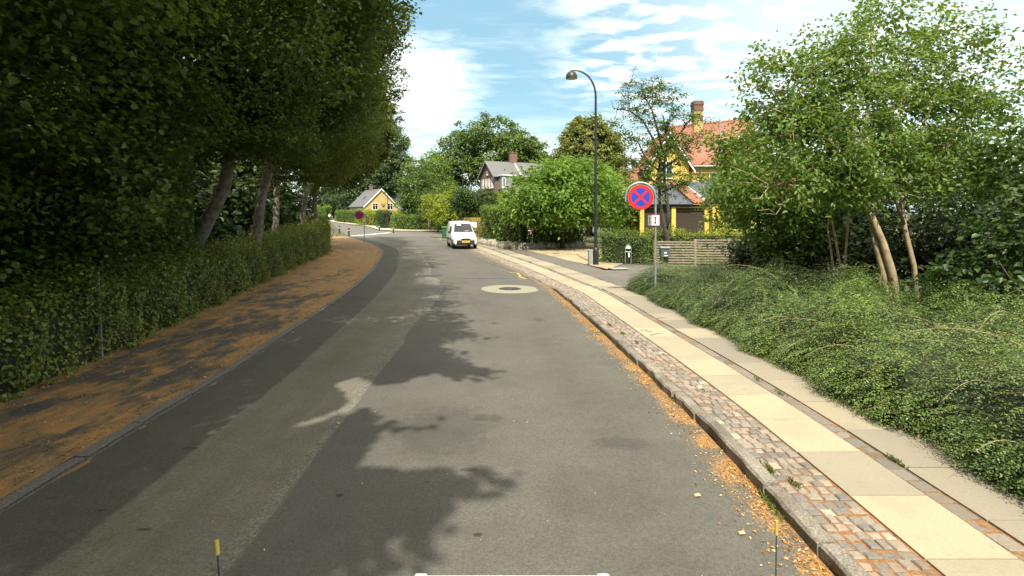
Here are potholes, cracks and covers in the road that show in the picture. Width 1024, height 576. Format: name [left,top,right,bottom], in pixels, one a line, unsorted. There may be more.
manhole cover [481,285,538,293]
